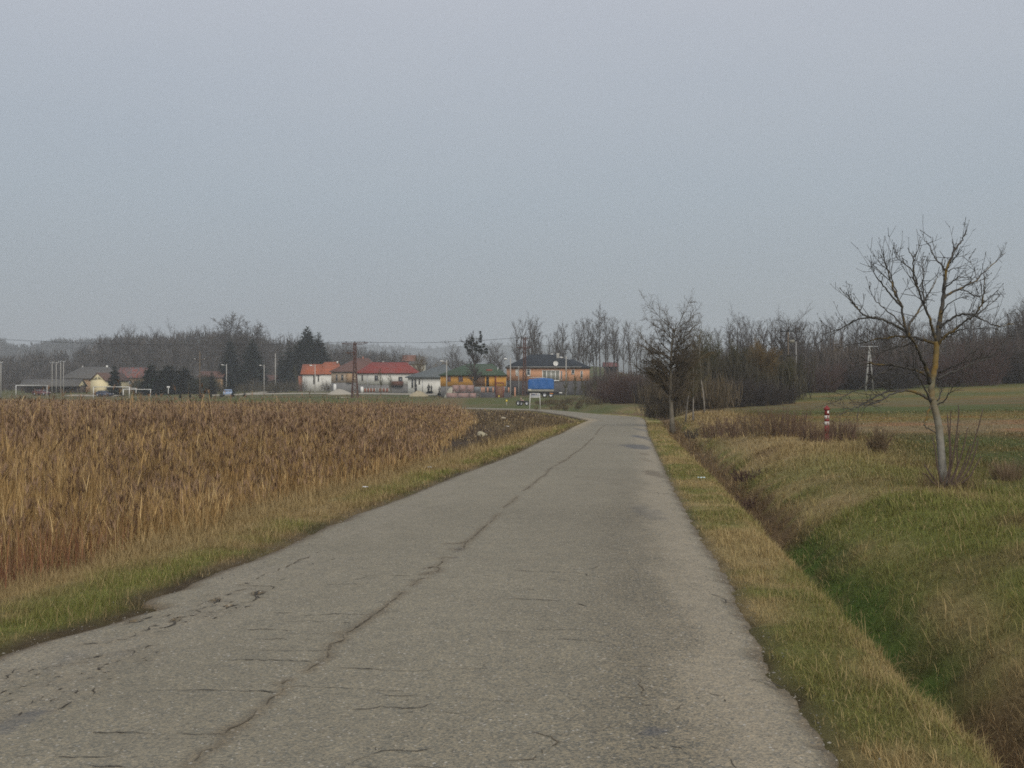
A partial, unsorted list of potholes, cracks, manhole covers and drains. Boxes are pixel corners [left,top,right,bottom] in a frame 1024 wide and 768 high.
crack [15,754,124,767]
crack [1,427,602,761]
